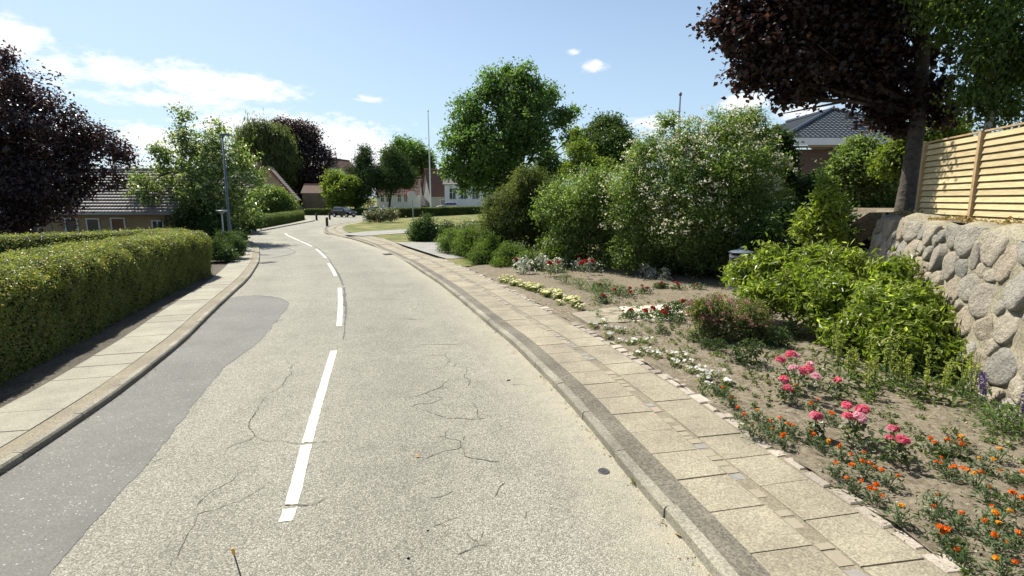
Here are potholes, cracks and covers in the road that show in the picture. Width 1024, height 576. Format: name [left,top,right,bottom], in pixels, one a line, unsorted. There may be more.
crack [171,474,264,562]
crack [379,344,499,462]
crack [227,368,342,448]
